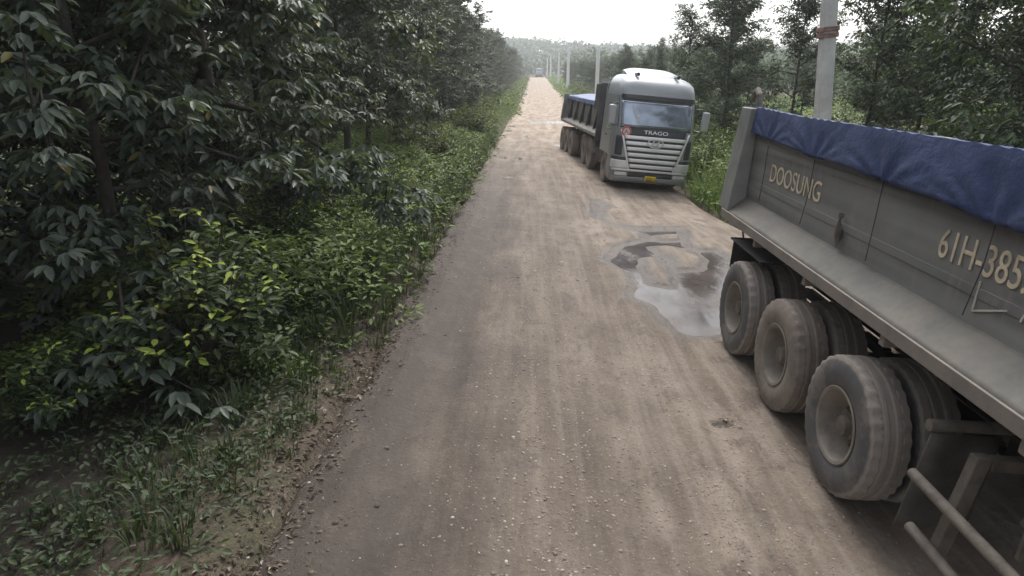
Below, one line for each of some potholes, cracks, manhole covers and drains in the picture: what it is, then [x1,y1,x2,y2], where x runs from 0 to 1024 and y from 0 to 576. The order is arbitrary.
pothole [585,198,731,340]
pothole [709,420,737,428]
